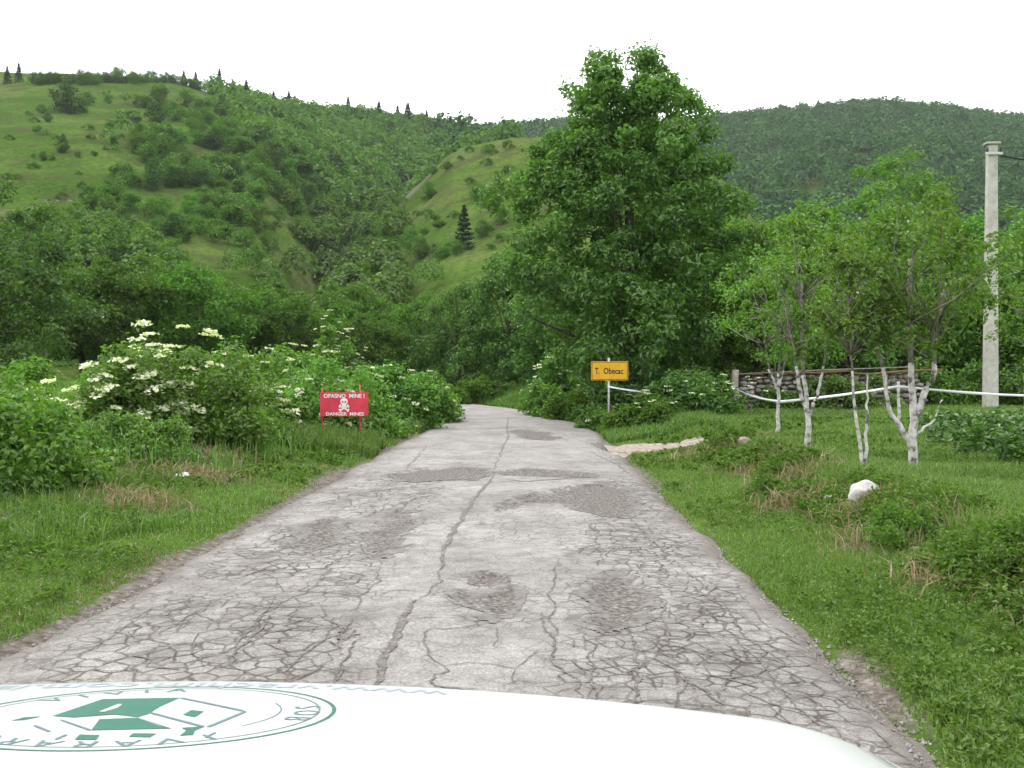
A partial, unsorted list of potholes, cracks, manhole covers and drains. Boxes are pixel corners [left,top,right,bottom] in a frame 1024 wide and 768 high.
crack [39,419,914,763]
